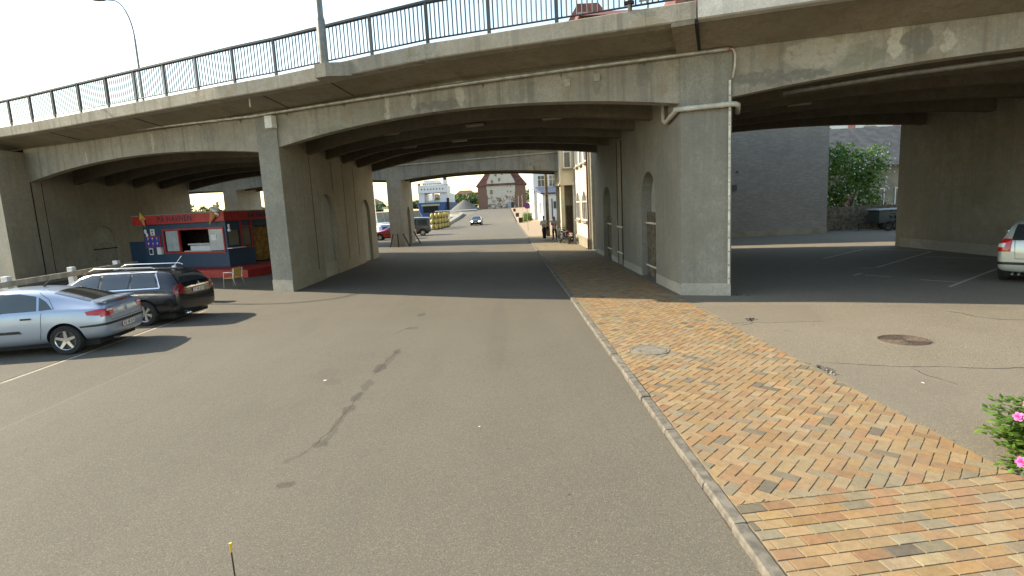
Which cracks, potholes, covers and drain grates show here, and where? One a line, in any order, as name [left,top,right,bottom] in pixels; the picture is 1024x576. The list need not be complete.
manhole cover [630,345,670,355]
crack [822,362,1018,384]
pothole [817,365,842,376]
manhole cover [875,334,936,346]
